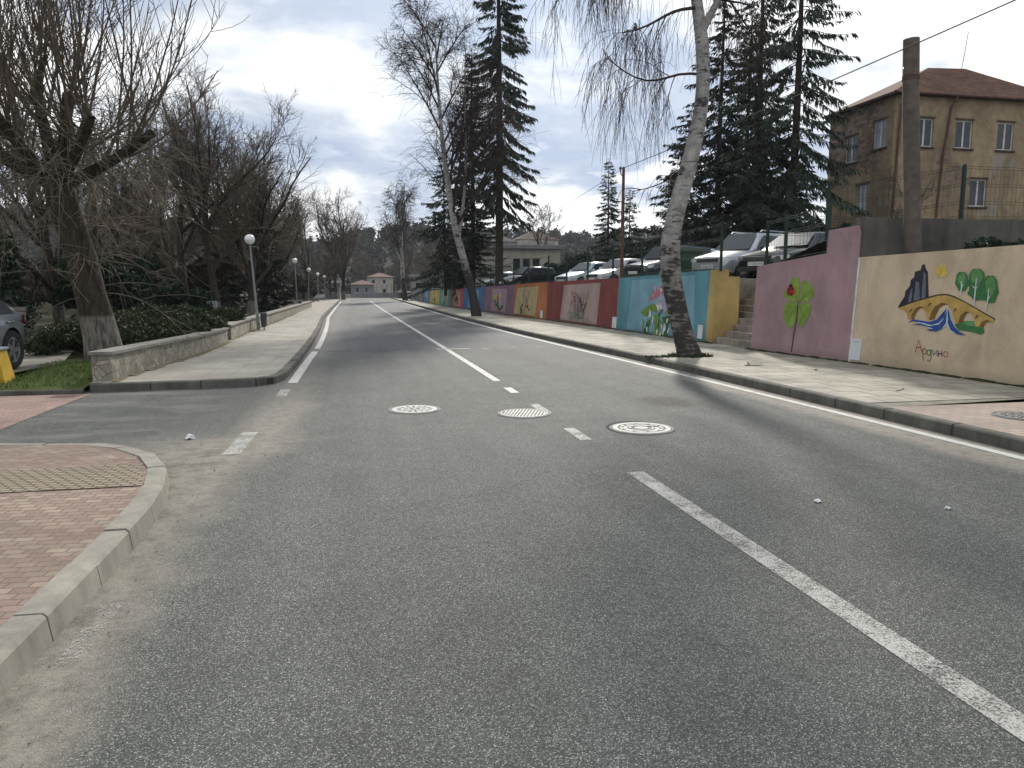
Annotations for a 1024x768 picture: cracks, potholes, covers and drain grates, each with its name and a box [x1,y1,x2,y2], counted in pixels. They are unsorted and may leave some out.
manhole cover [388,405,441,414]
manhole cover [991,411,1024,421]
manhole cover [606,421,675,435]
